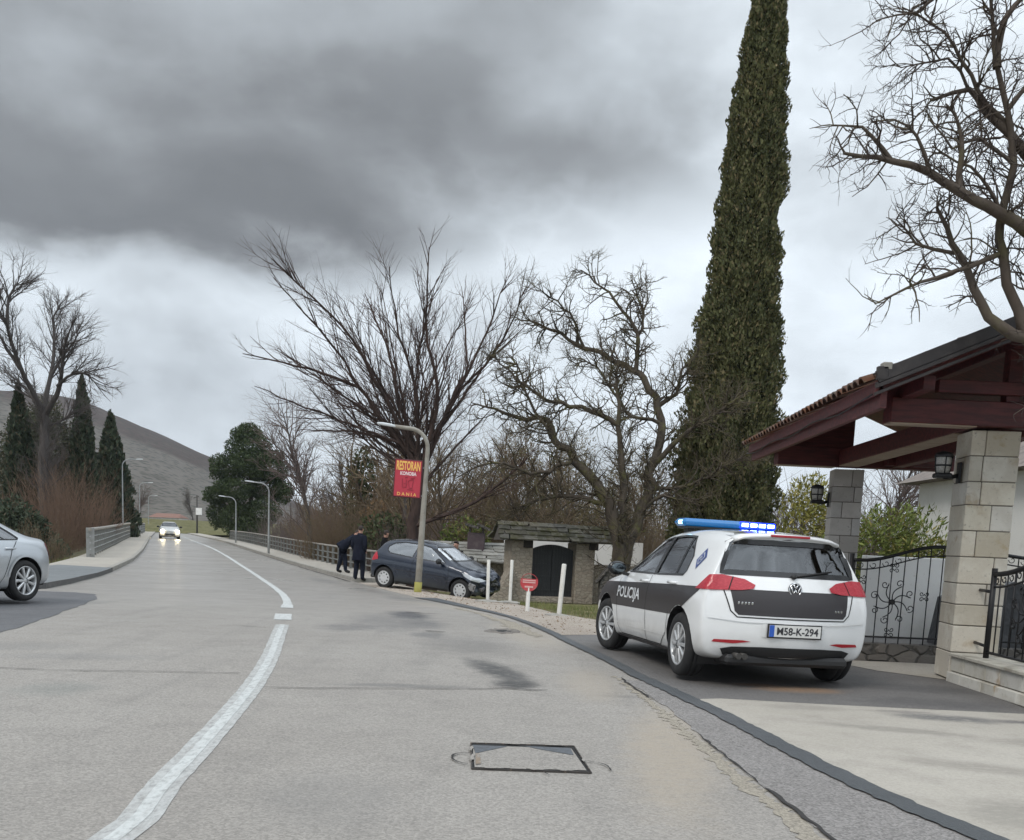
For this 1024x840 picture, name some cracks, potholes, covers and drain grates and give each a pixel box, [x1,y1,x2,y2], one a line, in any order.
manhole cover [469,742,592,774]
